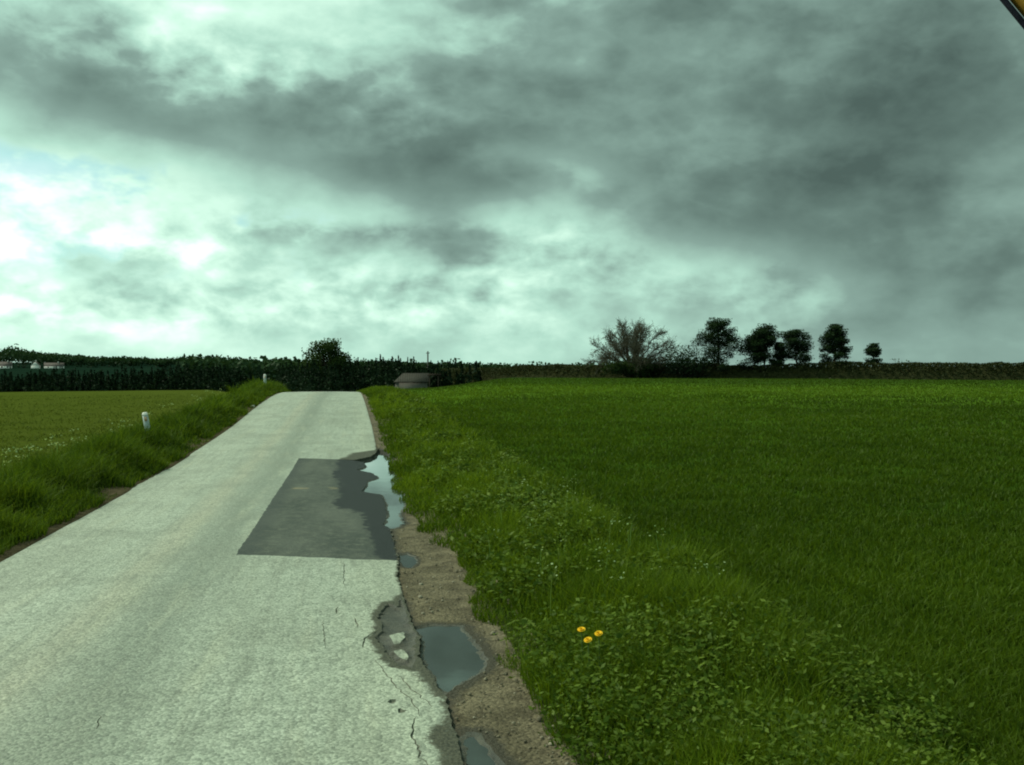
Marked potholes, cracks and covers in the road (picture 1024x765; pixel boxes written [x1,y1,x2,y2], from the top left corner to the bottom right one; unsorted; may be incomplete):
pothole [398,553,418,568]
pothole [375,598,418,668]
pothole [414,624,489,695]
crack [322,607,432,765]
